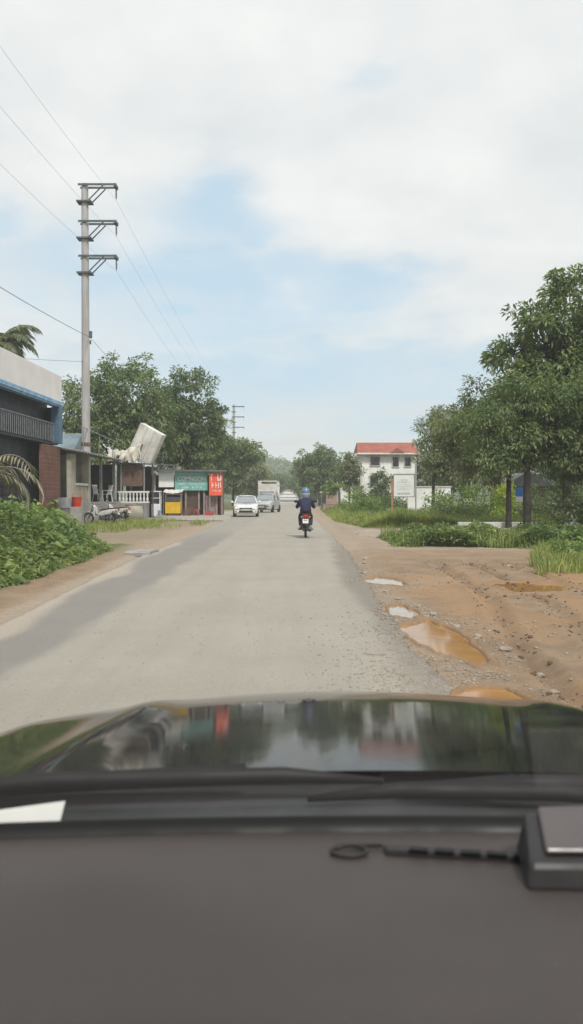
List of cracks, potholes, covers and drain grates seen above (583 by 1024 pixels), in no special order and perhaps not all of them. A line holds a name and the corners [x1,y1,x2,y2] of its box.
pothole [385,603,423,619]
pothole [362,575,412,587]
pothole [398,616,502,671]
pothole [450,683,540,700]
